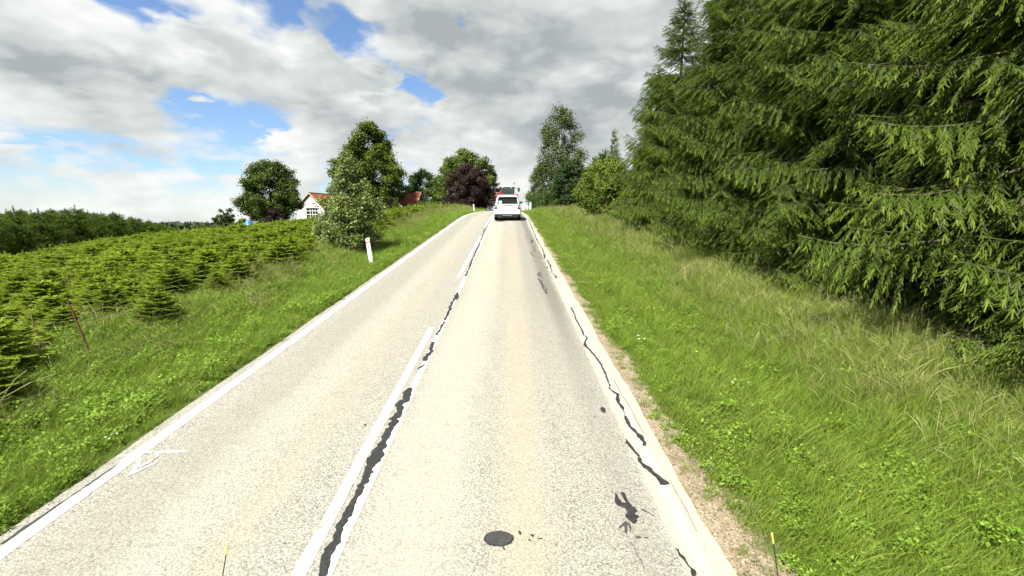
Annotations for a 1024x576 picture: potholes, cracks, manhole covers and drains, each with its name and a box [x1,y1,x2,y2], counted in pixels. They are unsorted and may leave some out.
crack [614,380,698,533]
